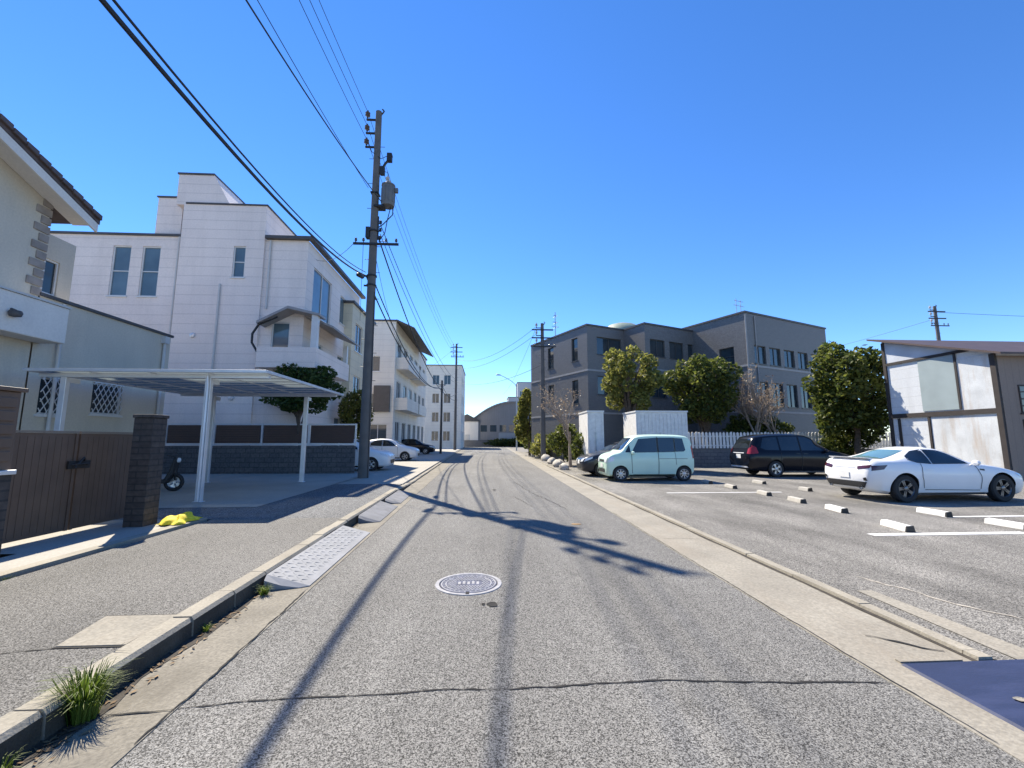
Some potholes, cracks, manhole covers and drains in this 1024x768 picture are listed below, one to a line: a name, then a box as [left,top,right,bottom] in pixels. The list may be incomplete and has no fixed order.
crack [509,513,996,742]
manhole cover [435,573,502,596]
